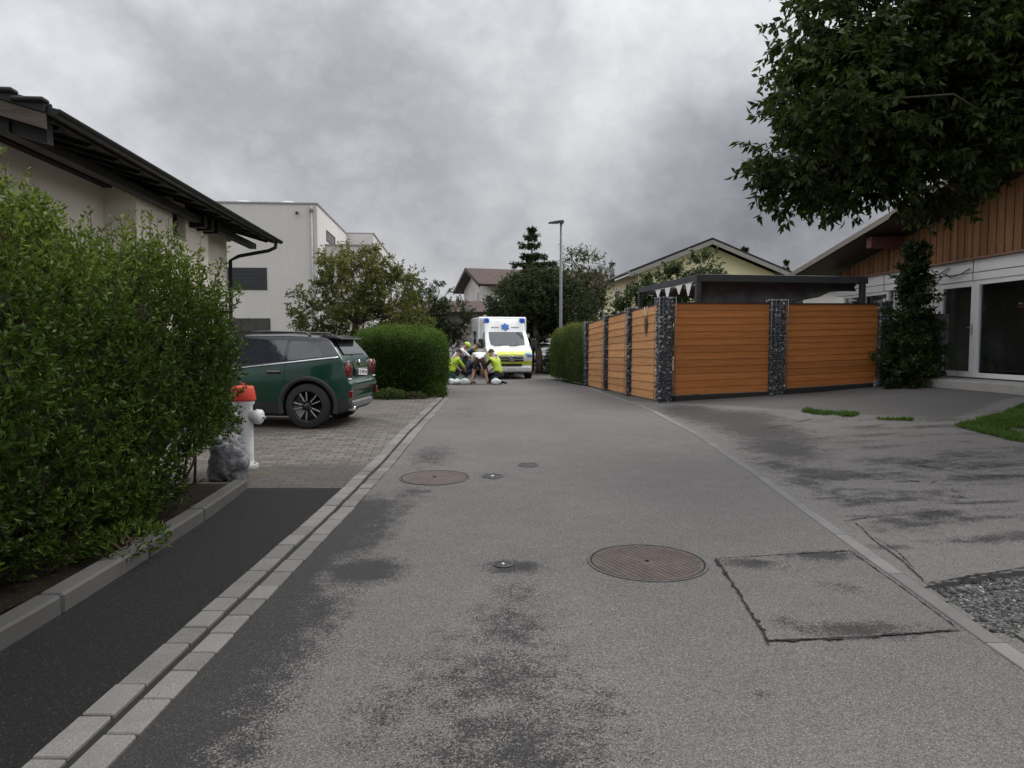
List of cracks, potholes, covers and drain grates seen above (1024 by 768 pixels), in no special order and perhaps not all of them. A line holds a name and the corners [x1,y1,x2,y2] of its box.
manhole cover [587,544,709,582]
utility cover [493,560,513,568]
crack [844,511,1024,583]
manhole cover [399,470,470,485]
